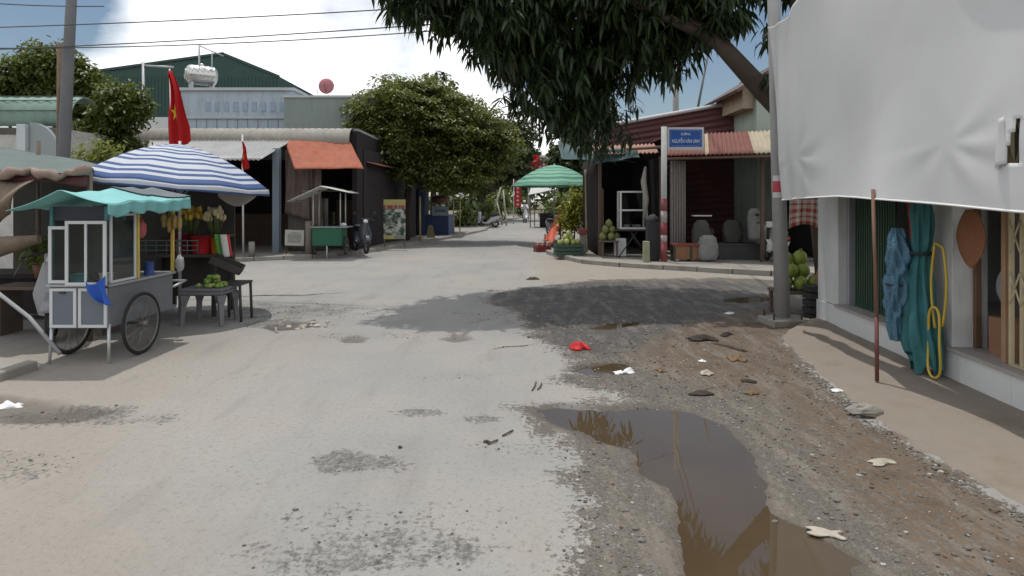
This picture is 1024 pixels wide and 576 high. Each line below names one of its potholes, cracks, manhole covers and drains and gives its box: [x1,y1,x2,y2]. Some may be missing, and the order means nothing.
pothole [256,321,318,333]
pothole [432,333,480,344]
pothole [516,400,891,576]
pothole [333,334,376,344]
pothole [552,358,640,378]
pothole [0,393,127,427]
pothole [574,319,648,331]
